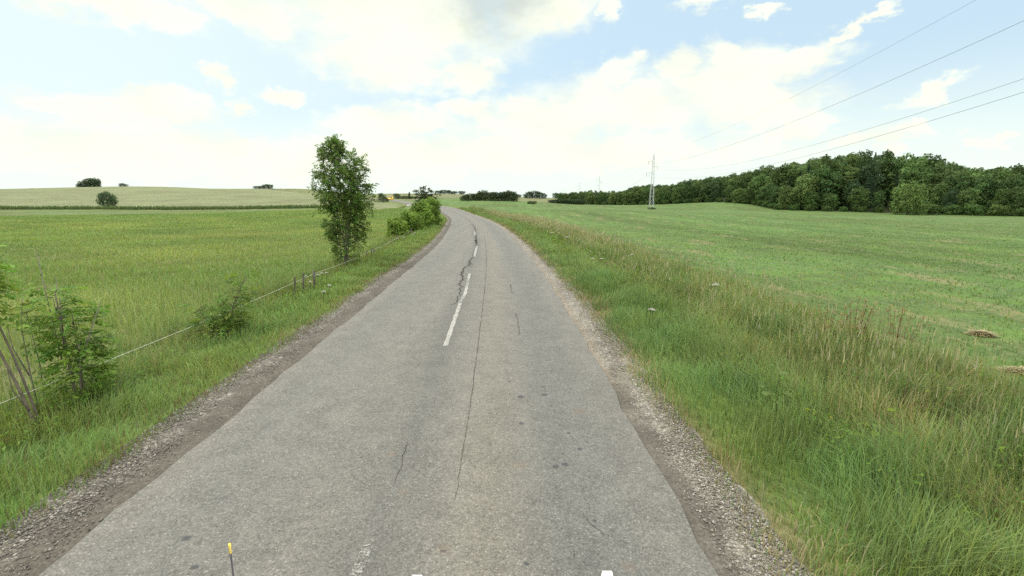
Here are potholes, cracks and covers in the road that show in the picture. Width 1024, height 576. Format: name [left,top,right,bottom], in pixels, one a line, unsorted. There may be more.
crack [454,229,478,304]
